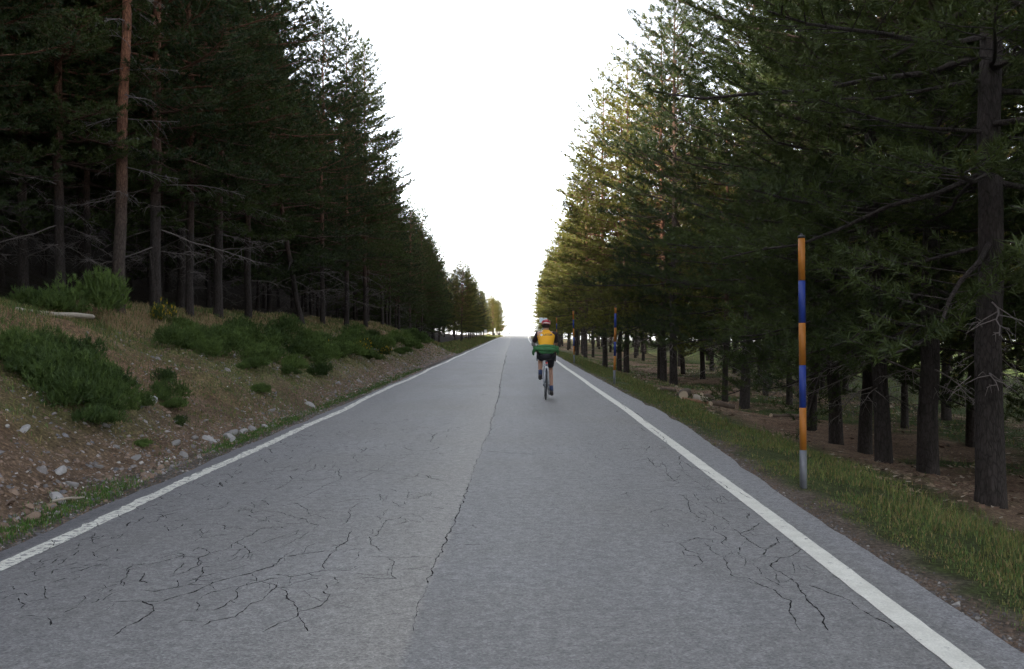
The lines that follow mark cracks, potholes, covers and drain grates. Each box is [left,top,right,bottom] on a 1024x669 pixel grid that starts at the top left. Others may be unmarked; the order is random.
crack [588,406,894,631]
crack [483,356,525,454]
crack [1,420,468,636]
